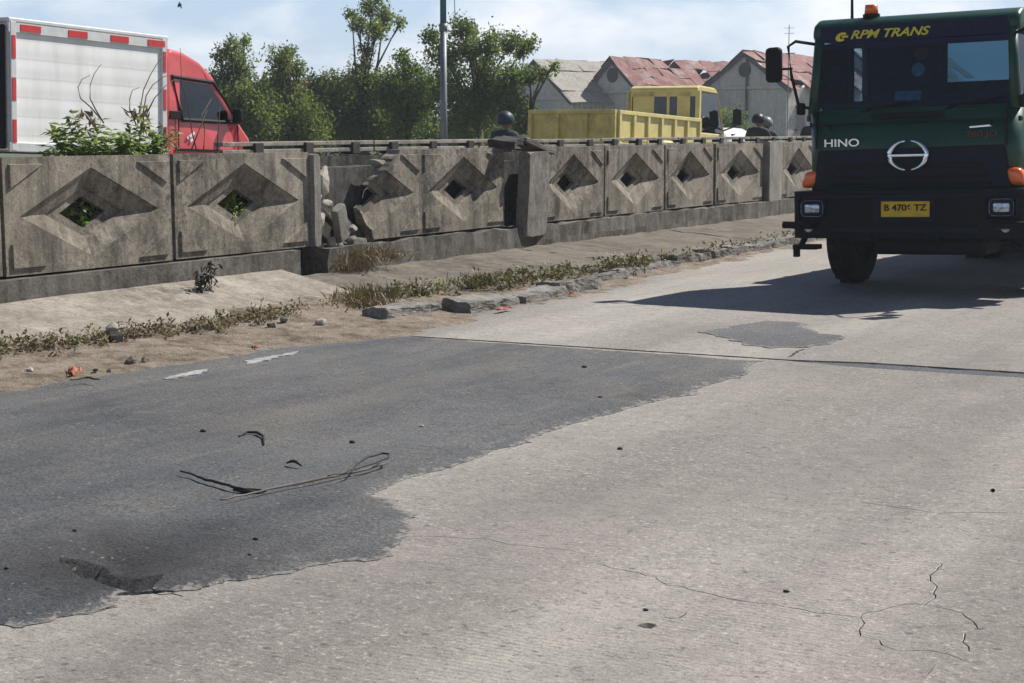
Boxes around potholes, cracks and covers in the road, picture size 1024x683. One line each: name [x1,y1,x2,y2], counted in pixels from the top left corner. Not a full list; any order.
crack [598,562,978,676]
pothole [45,525,179,596]
crack [863,501,1004,513]
